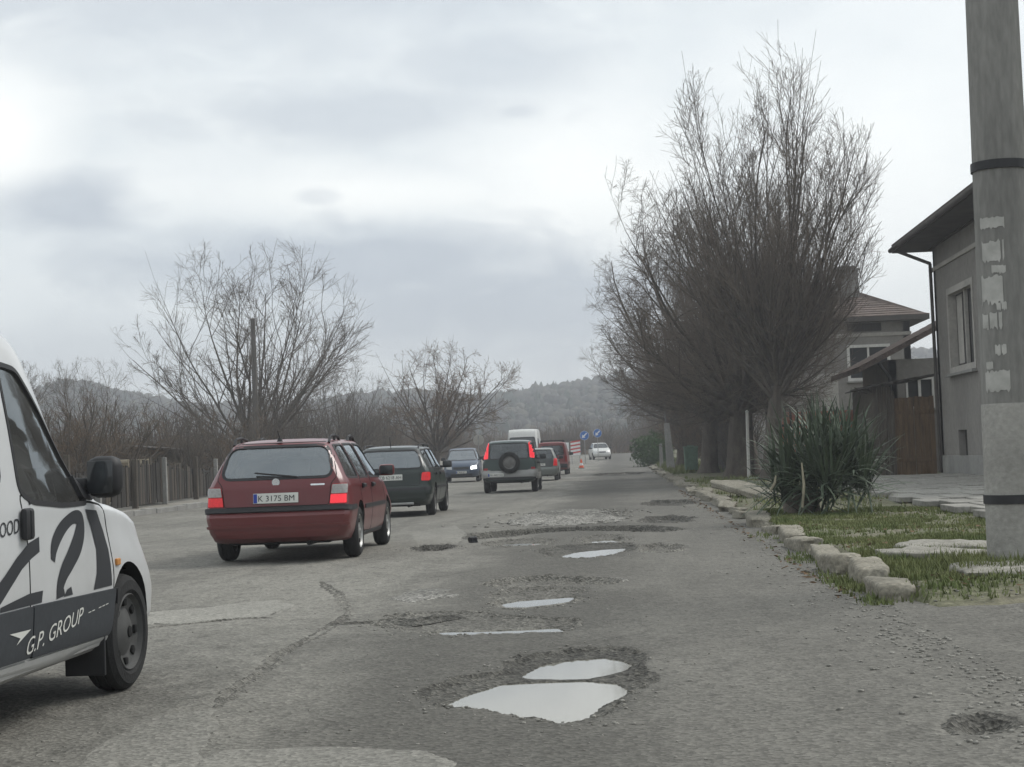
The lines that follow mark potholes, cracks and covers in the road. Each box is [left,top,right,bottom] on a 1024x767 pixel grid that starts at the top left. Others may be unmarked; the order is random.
pothole [581,534,629,543]
pothole [477,573,623,588]
crack [319,581,467,626]
pothole [412,544,457,552]
pothole [481,538,557,547]
pothole [416,646,660,724]
pothole [635,542,688,553]
pothole [941,710,1024,735]
pothole [637,514,699,523]
pothole [462,524,686,539]
pothole [370,610,583,635]
pothole [538,542,640,559]
